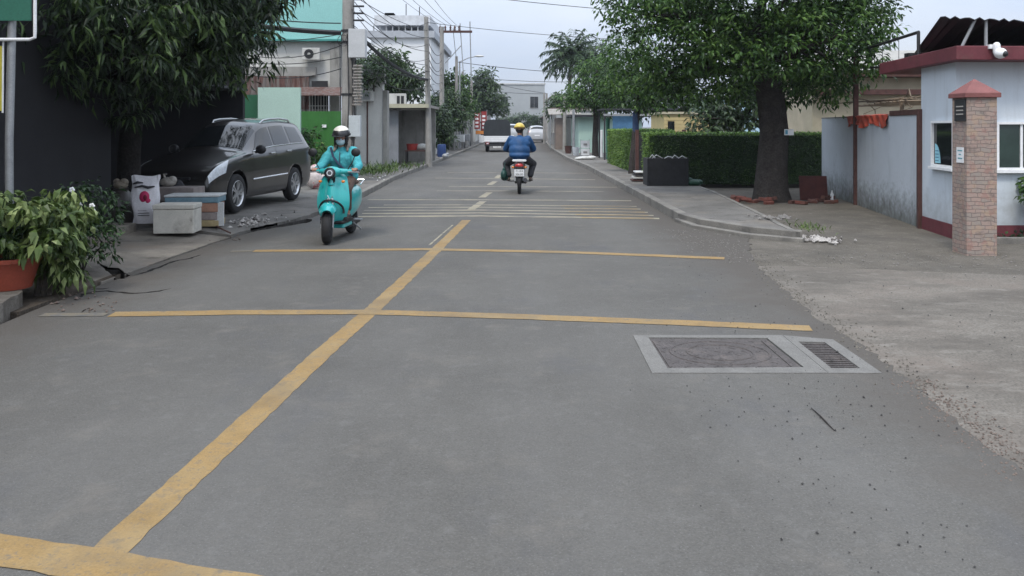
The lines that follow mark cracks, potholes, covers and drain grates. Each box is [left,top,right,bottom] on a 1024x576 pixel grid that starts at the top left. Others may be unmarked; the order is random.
crack [74,288,167,313]
drain grate [783,335,882,373]
manhole cover [633,335,828,373]
